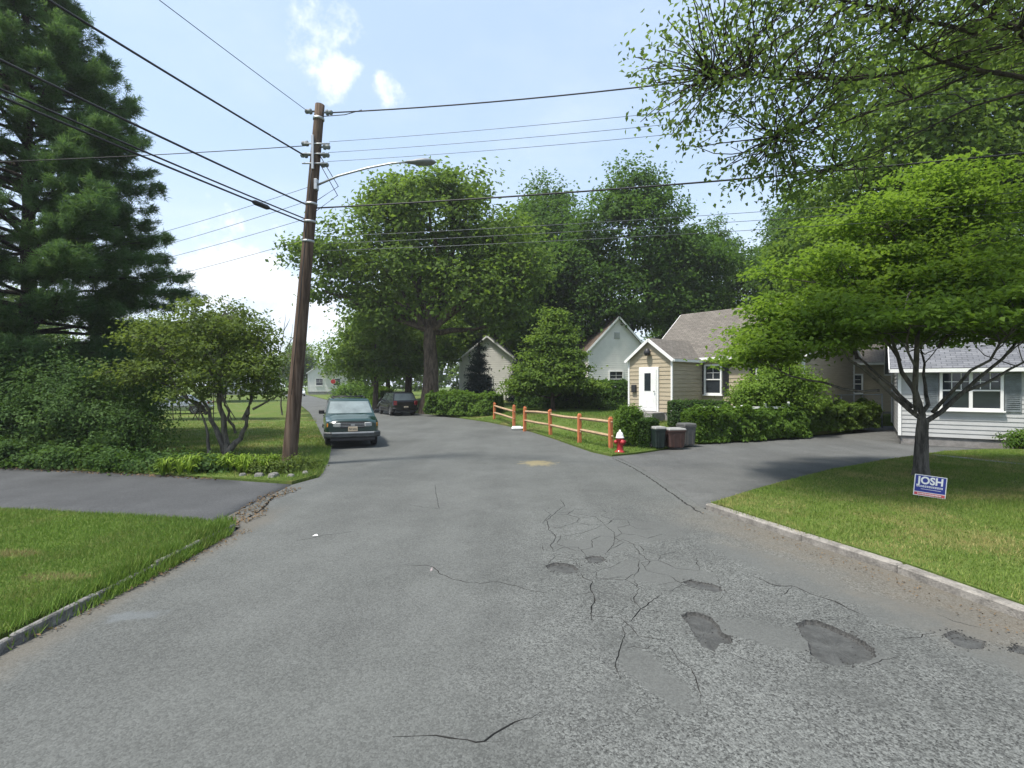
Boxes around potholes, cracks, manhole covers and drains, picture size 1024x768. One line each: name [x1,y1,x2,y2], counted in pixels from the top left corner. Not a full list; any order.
pothole [683,580,722,592]
pothole [943,630,986,649]
pothole [796,619,877,666]
crack [753,576,860,614]
crack [542,501,719,703]
pothole [680,612,733,651]
pothole [545,562,579,574]
crack [393,713,539,743]
crack [416,565,544,593]
